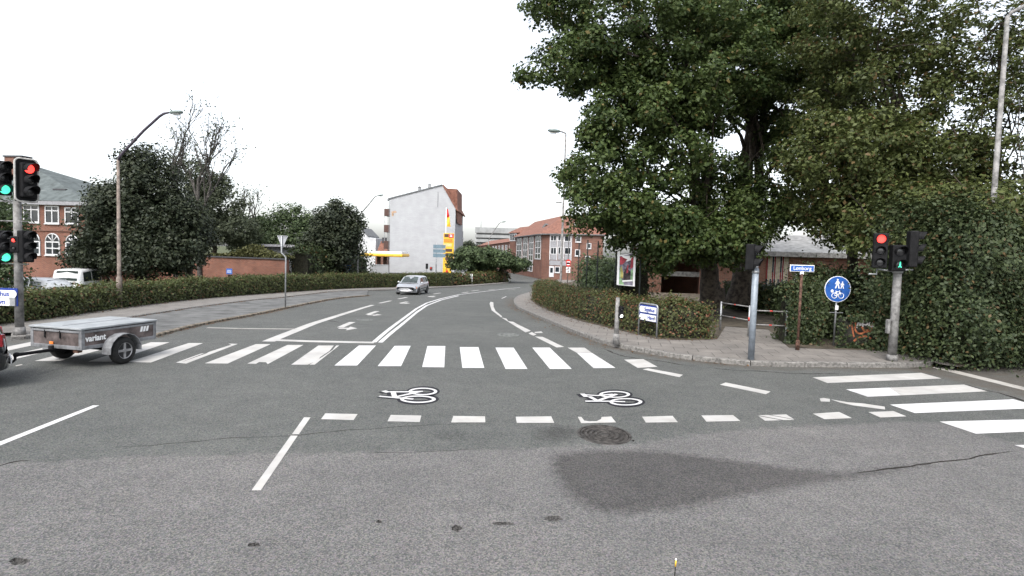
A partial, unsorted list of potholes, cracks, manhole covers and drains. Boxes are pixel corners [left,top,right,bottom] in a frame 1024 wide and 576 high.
manhole cover [577,425,632,445]
crack [858,451,1014,473]
pothole [8,557,30,565]
